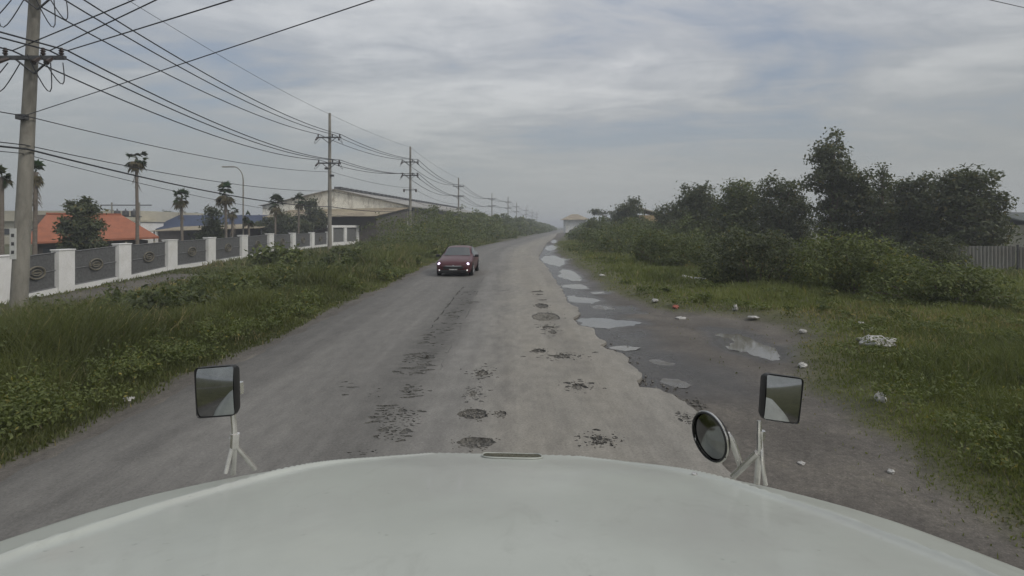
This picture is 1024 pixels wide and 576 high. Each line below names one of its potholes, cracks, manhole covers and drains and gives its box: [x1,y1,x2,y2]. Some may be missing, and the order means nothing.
pothole [457,407,493,422]
pothole [532,312,565,321]
pothole [574,429,625,448]
pothole [464,363,497,380]
pothole [451,435,500,452]
pothole [522,352,598,362]
pothole [563,379,607,394]
